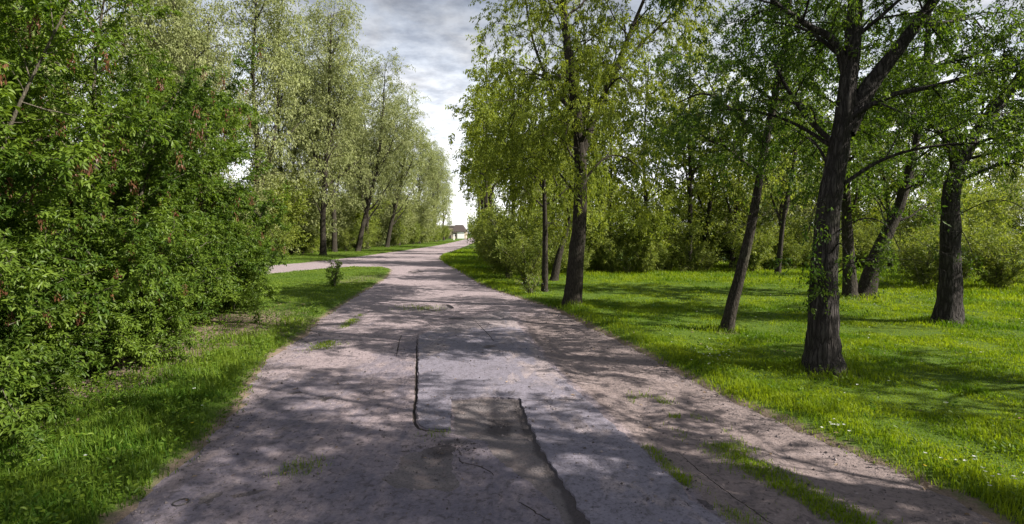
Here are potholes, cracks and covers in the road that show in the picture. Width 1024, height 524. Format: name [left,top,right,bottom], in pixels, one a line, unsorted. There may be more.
crack [396,335,448,432]
crack [678,452,773,524]
